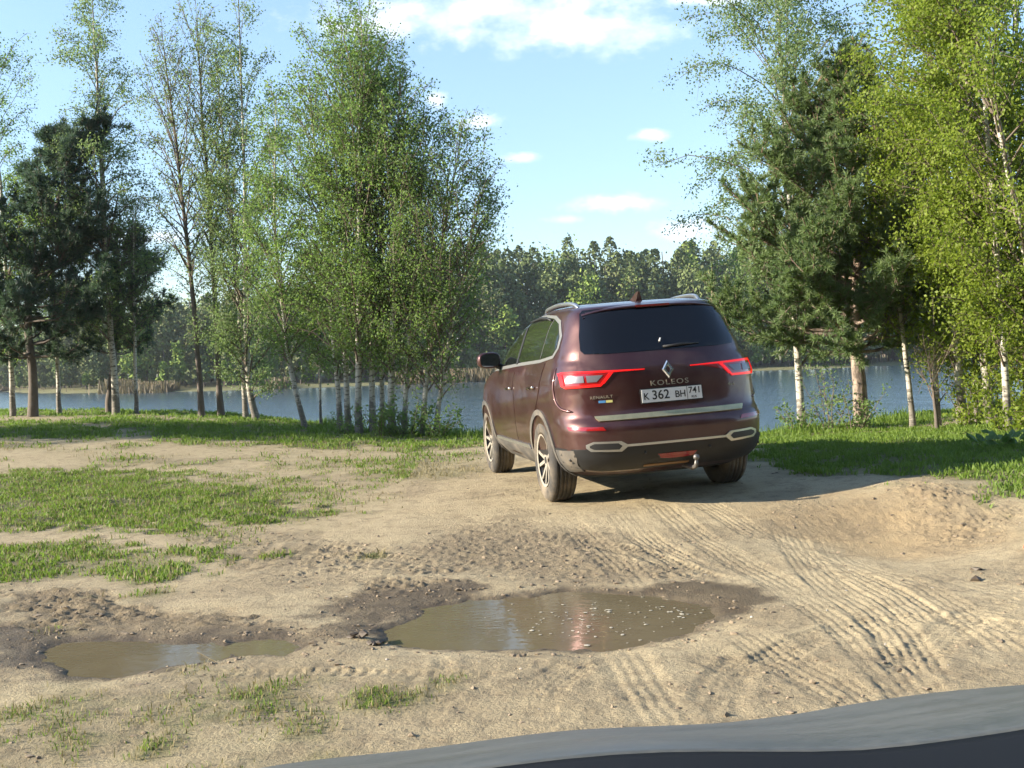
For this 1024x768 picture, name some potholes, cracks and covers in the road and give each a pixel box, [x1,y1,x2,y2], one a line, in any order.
pothole [356,581,746,657]
pothole [14,626,335,683]
